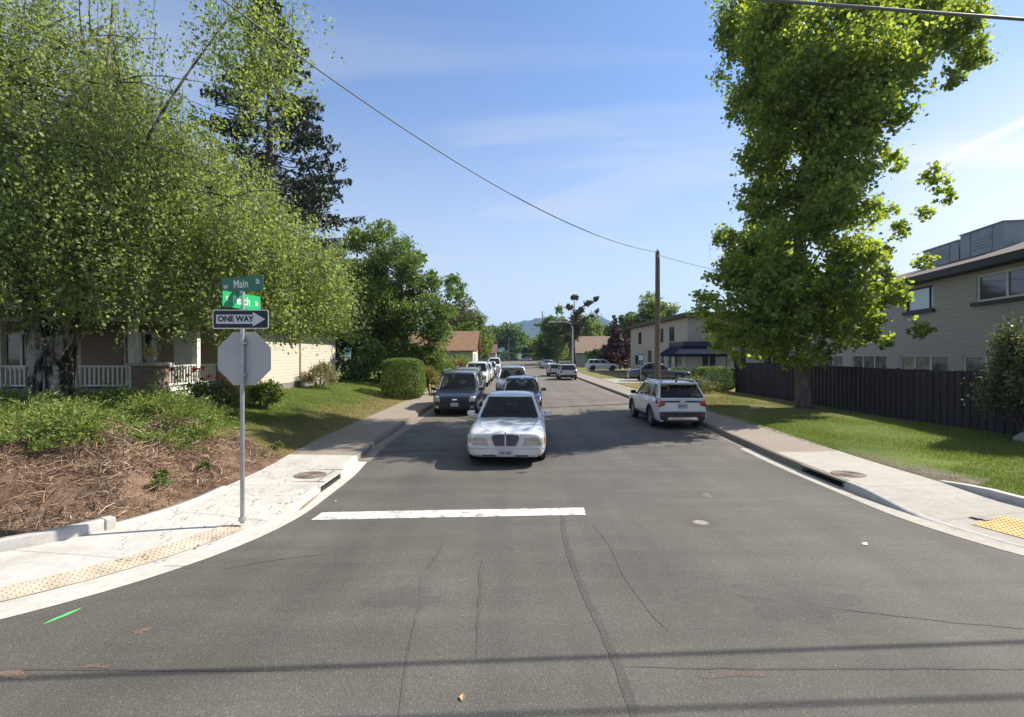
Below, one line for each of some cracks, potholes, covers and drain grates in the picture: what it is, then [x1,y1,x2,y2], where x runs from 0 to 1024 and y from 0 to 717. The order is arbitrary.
crack [398,578,421,717]
drain grate [800,464,861,488]
crack [737,595,1024,629]
manhole cover [290,469,343,482]
crack [596,529,668,631]
manhole cover [831,470,867,478]
drain grate [313,471,342,493]
crack [475,562,483,657]
